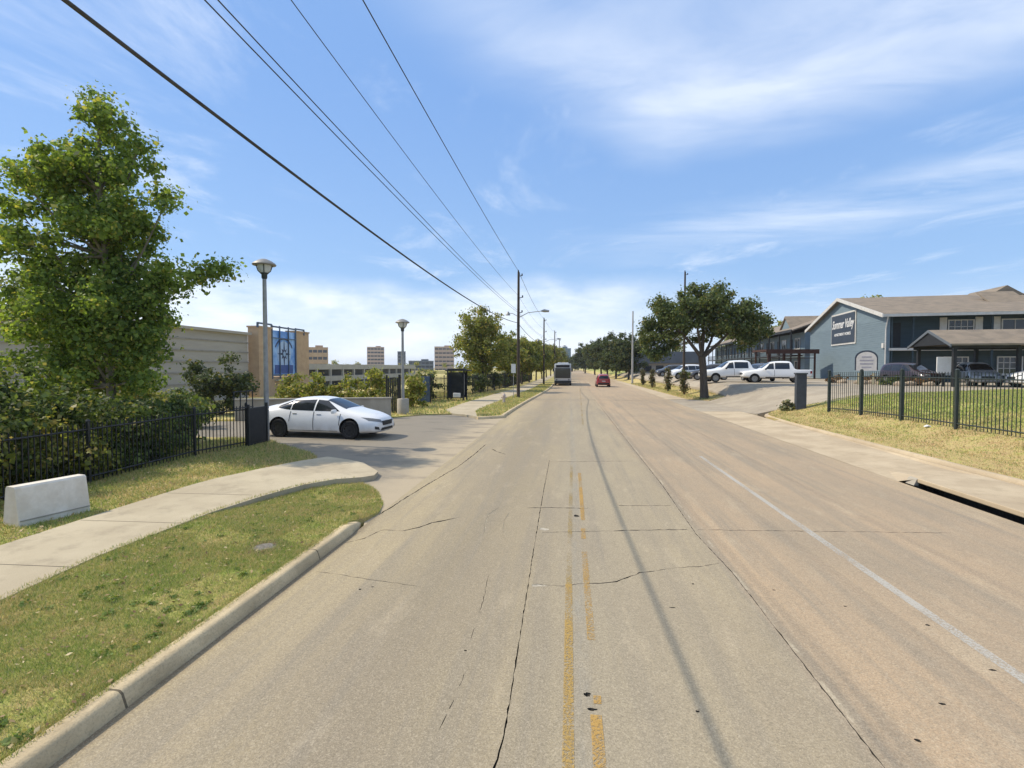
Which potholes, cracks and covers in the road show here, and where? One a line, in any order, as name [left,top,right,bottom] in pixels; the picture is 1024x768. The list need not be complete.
crack [540,563,718,586]
drain grate [905,476,1024,525]
crack [346,517,459,543]
